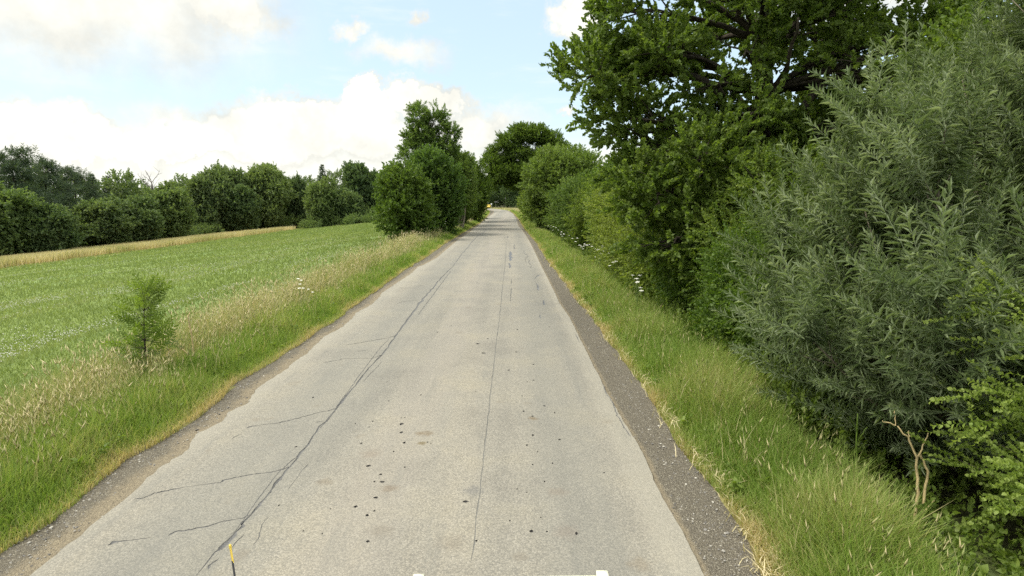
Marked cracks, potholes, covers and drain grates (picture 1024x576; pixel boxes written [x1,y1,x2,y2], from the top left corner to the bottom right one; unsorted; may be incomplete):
crack [107,230,486,573]
